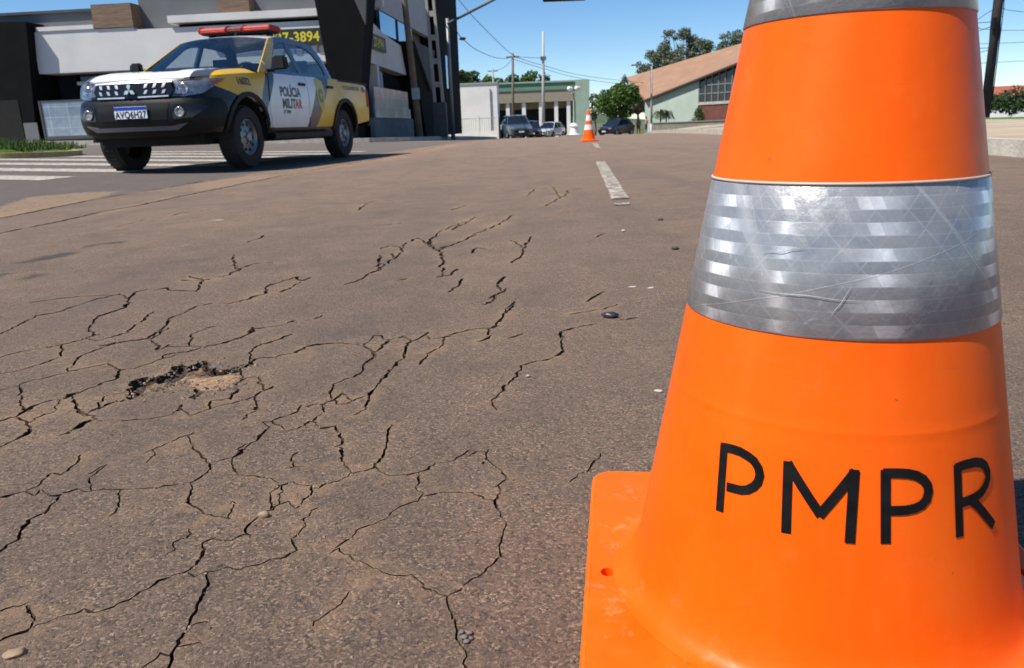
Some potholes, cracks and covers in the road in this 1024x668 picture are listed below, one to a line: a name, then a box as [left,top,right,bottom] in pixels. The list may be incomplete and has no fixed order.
pothole [125,361,245,400]
crack [0,187,605,668]
crack [491,291,638,410]
